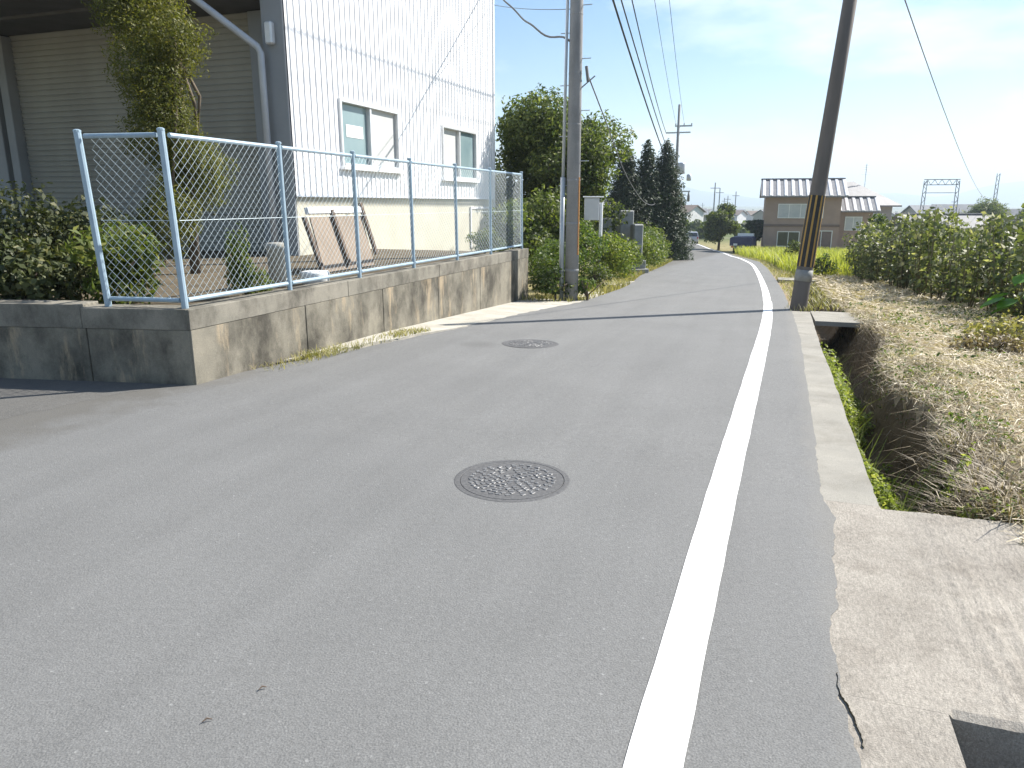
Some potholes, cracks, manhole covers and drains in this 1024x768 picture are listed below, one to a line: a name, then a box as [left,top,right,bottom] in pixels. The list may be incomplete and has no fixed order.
manhole cover [502,339,559,348]
crack [836,672,864,749]
manhole cover [454,460,570,502]
